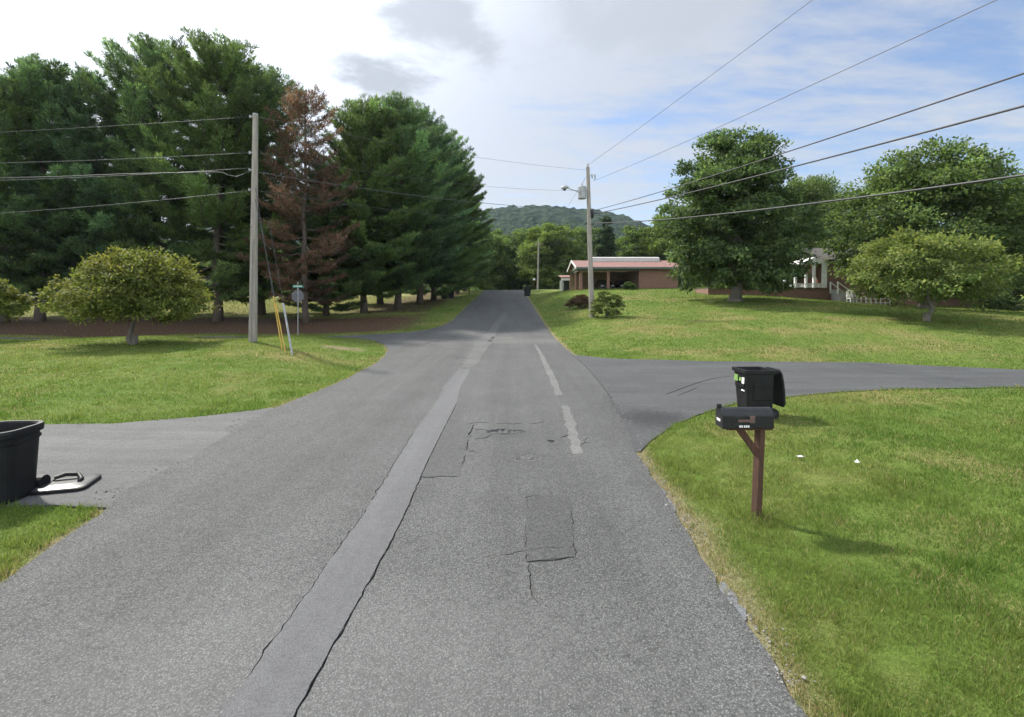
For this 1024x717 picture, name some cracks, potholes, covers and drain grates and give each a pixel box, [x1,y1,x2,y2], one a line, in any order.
crack [247,405,544,717]
